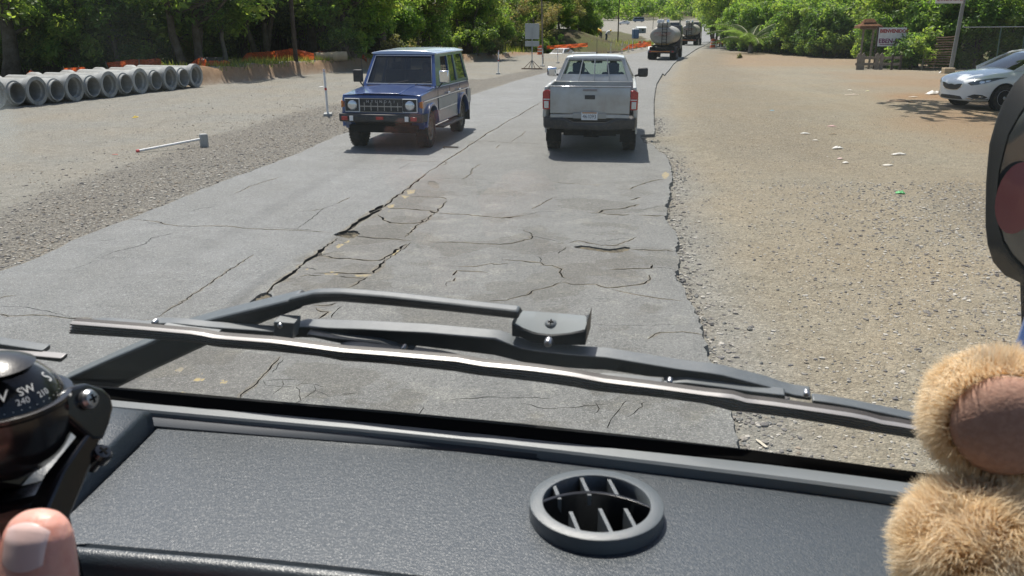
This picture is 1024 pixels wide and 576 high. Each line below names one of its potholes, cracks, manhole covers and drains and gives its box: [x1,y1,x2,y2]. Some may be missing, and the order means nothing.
crack [77,102,677,318]
crack [240,357,355,400]
crack [452,396,649,429]
crack [1,295,76,319]
pothole [334,230,360,238]
